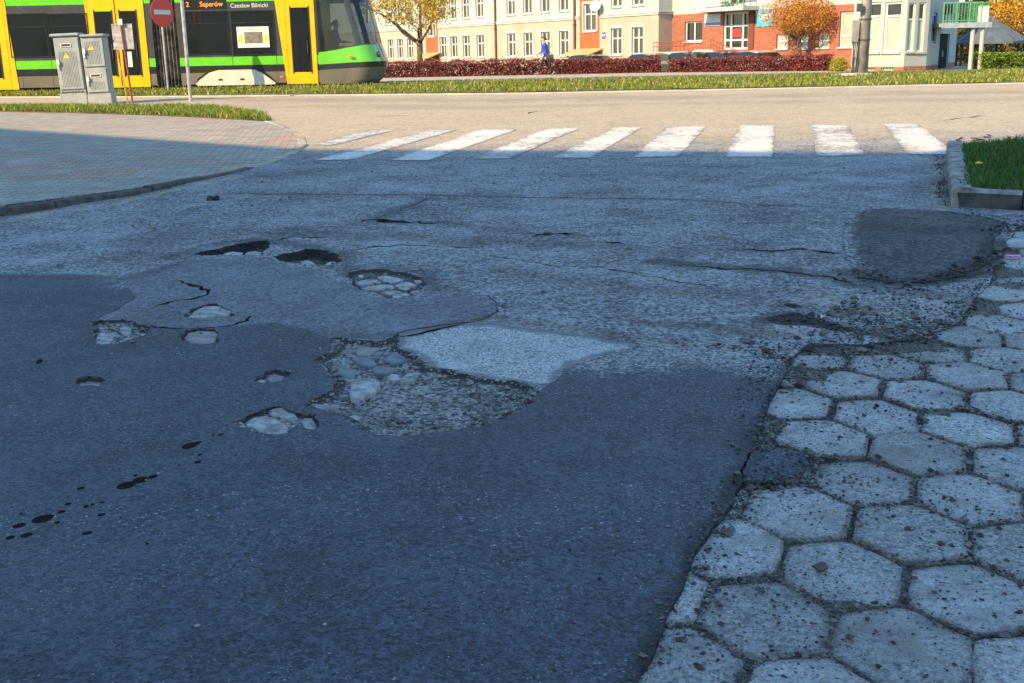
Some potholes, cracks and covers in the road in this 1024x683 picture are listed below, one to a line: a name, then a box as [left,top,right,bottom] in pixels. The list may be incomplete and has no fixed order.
crack [399,295,498,337]
pothole [345,269,427,299]
pothole [233,408,319,435]
pothole [256,372,289,383]
pothole [184,304,234,318]
pothole [307,335,539,436]
crack [237,193,800,224]
pothole [93,320,150,345]
pothole [181,330,219,344]
crack [275,237,465,251]
pothole [76,378,104,386]
pothole [192,240,271,256]
